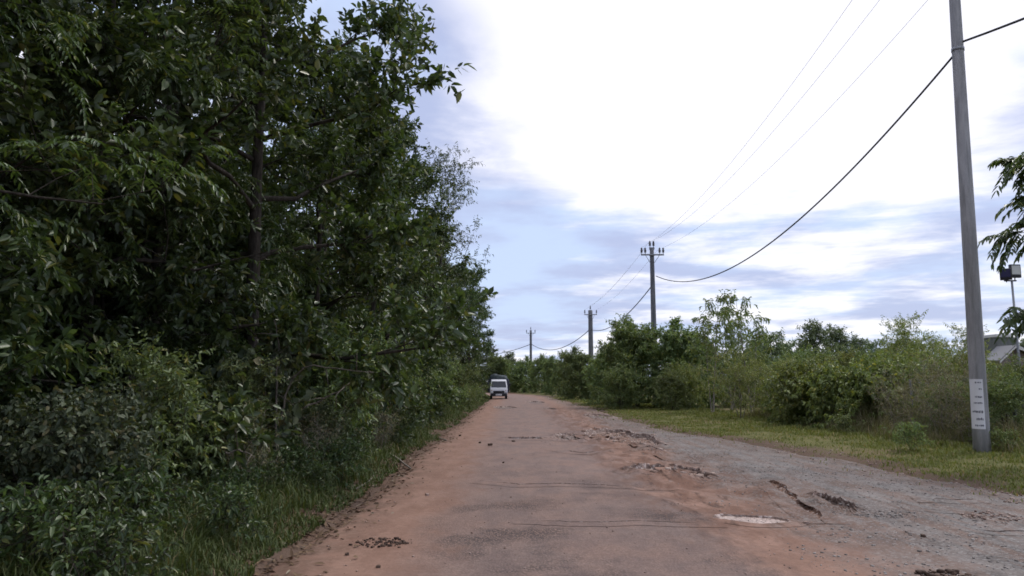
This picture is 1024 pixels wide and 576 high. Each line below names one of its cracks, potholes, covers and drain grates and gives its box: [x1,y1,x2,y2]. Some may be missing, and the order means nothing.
pothole [797,491,874,515]
pothole [654,464,726,481]
pothole [574,427,673,449]
pothole [612,463,692,476]
